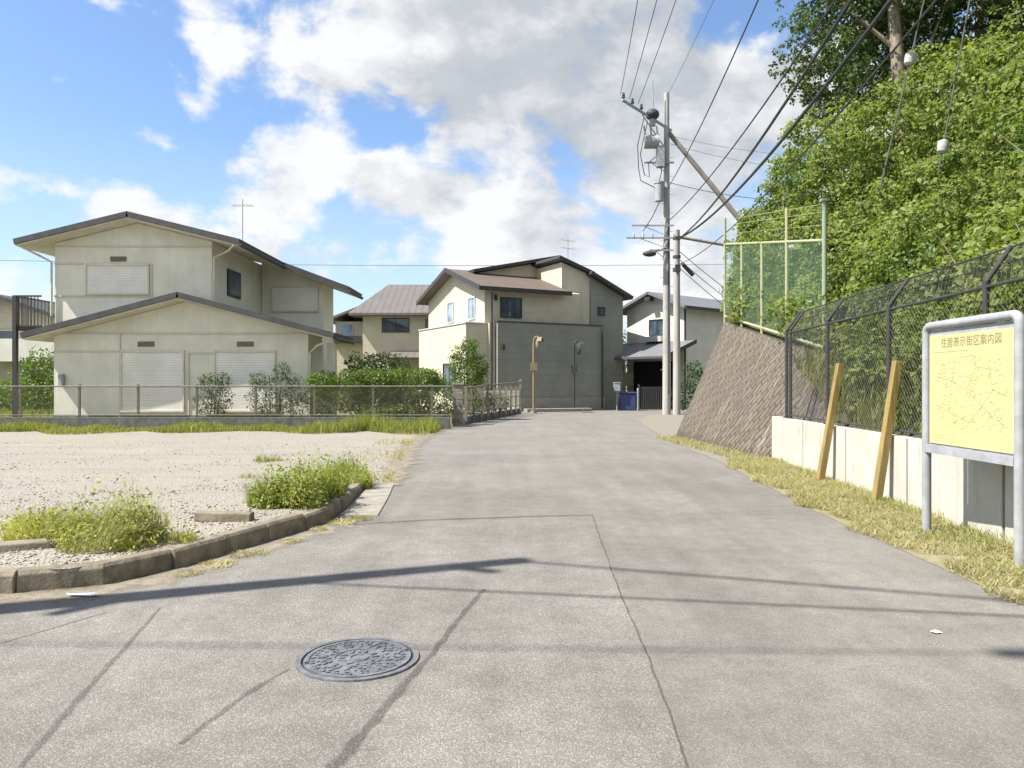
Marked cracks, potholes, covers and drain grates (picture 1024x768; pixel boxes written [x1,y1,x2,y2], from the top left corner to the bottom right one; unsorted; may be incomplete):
manhole cover [295,637,419,682]
